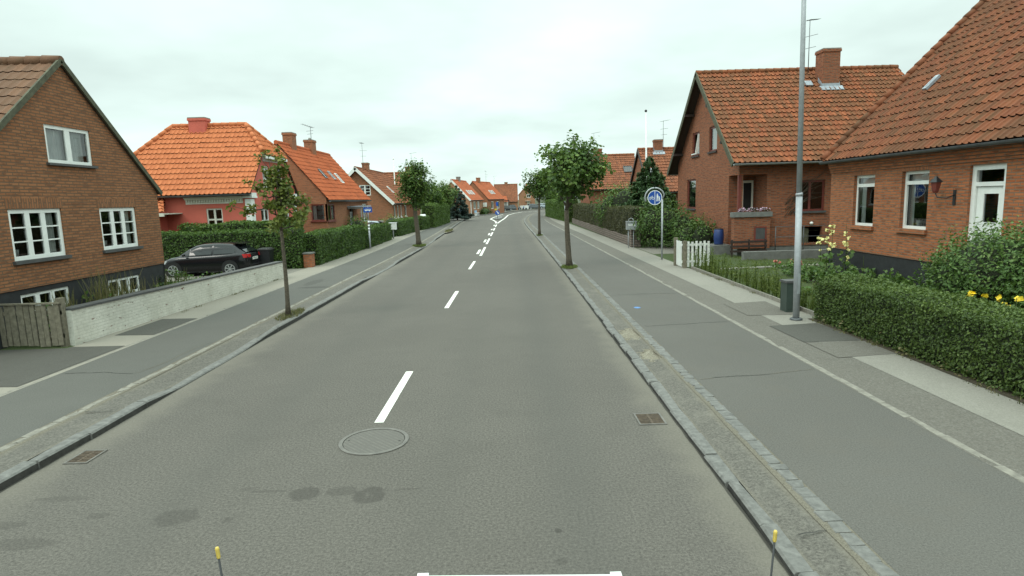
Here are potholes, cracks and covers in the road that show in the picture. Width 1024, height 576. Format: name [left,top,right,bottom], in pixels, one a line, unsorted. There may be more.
drain grate [633,413,667,425]
manhole cover [338,428,409,456]
drain grate [62,449,108,465]
